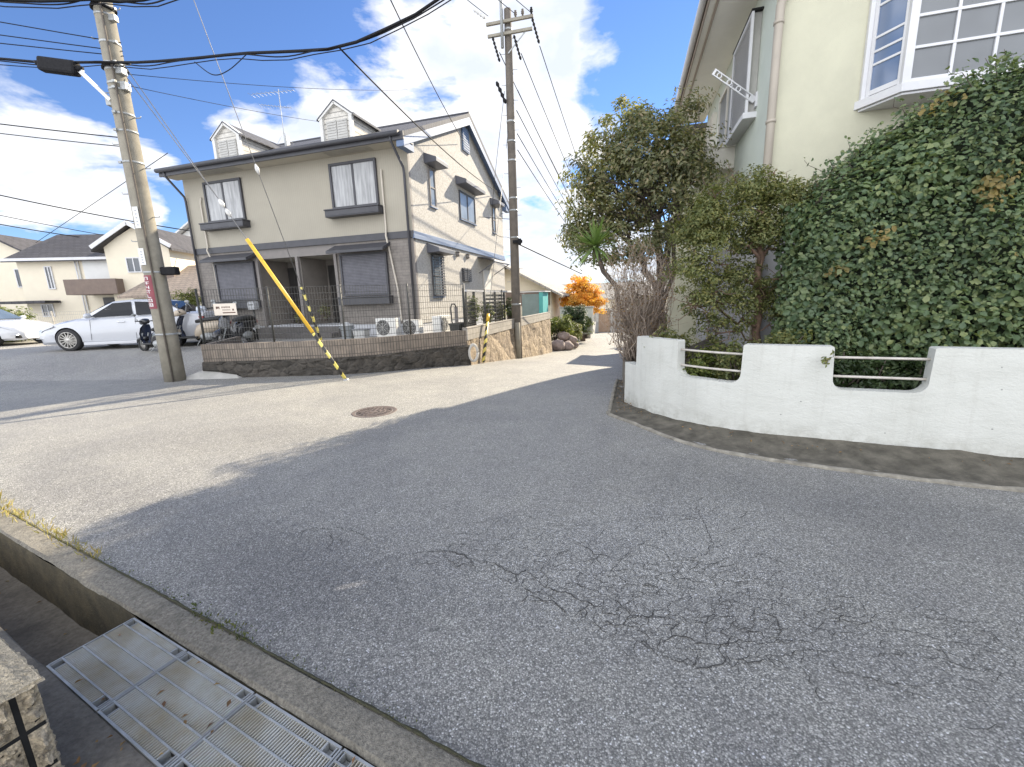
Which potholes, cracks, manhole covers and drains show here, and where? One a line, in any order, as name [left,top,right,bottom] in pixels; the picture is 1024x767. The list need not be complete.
drain grate [46,618,187,714]
crack [440,506,783,583]
drain grate [97,651,255,767]
crack [438,541,1024,705]
drain grate [169,693,343,767]
manhole cover [351,406,397,418]
drain grate [328,748,374,767]
crack [403,551,469,569]
